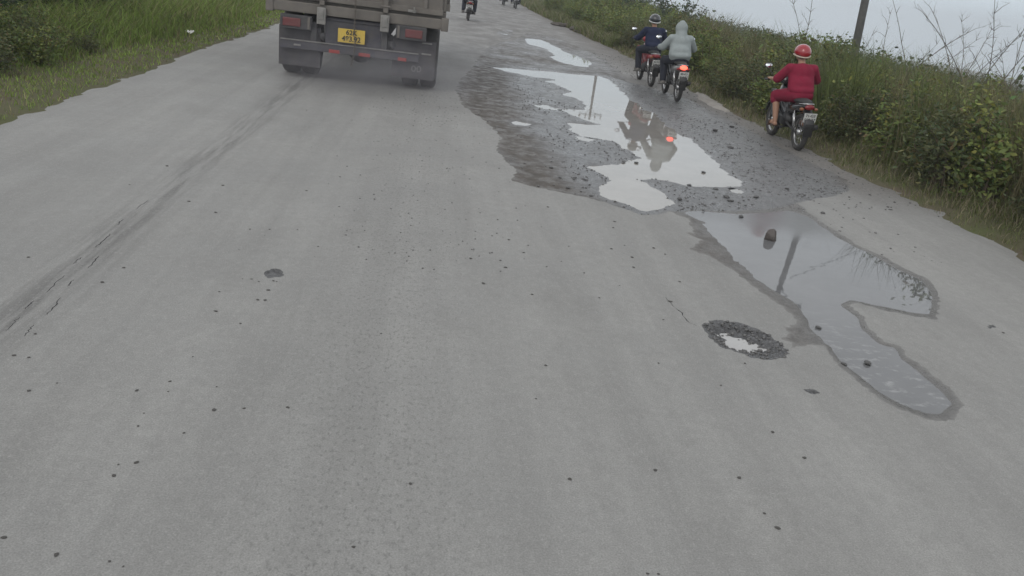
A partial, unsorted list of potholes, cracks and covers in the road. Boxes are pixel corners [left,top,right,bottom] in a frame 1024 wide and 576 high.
crack [6,221,120,335]
pothole [455,63,850,215]
pothole [472,33,627,81]
pothole [264,269,284,278]
pothole [673,203,965,421]
